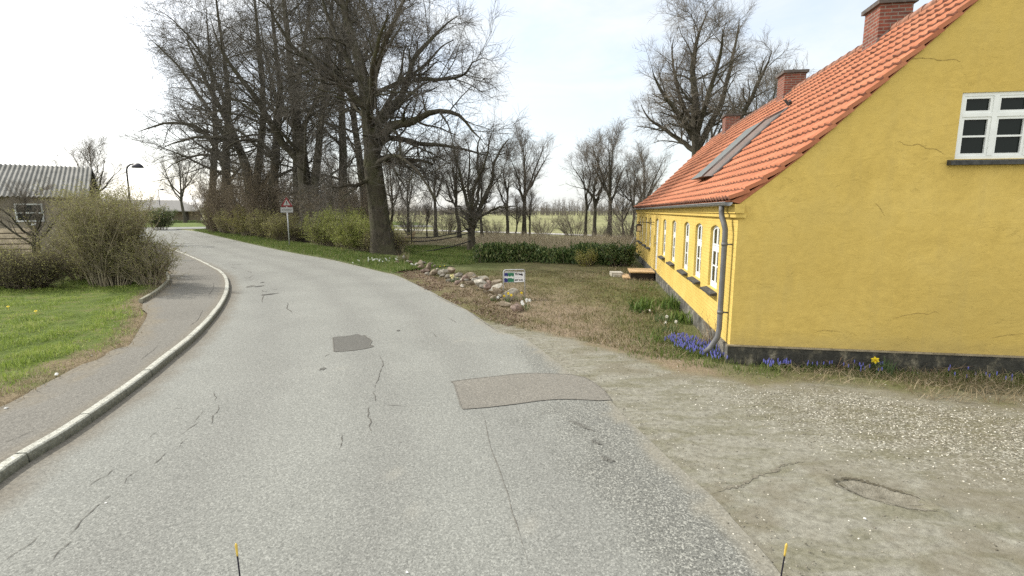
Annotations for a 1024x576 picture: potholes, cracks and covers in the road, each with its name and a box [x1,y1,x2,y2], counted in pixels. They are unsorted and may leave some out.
crack [52,469,136,561]
